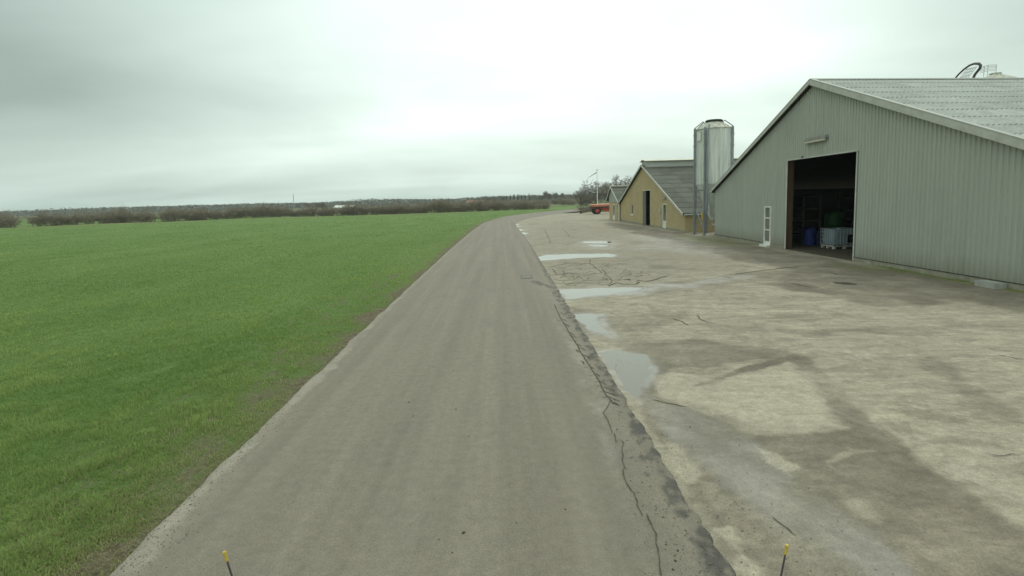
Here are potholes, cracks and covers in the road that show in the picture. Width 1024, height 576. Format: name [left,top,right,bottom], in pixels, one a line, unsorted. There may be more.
crack [554,305,662,576]
crack [551,262,666,286]
